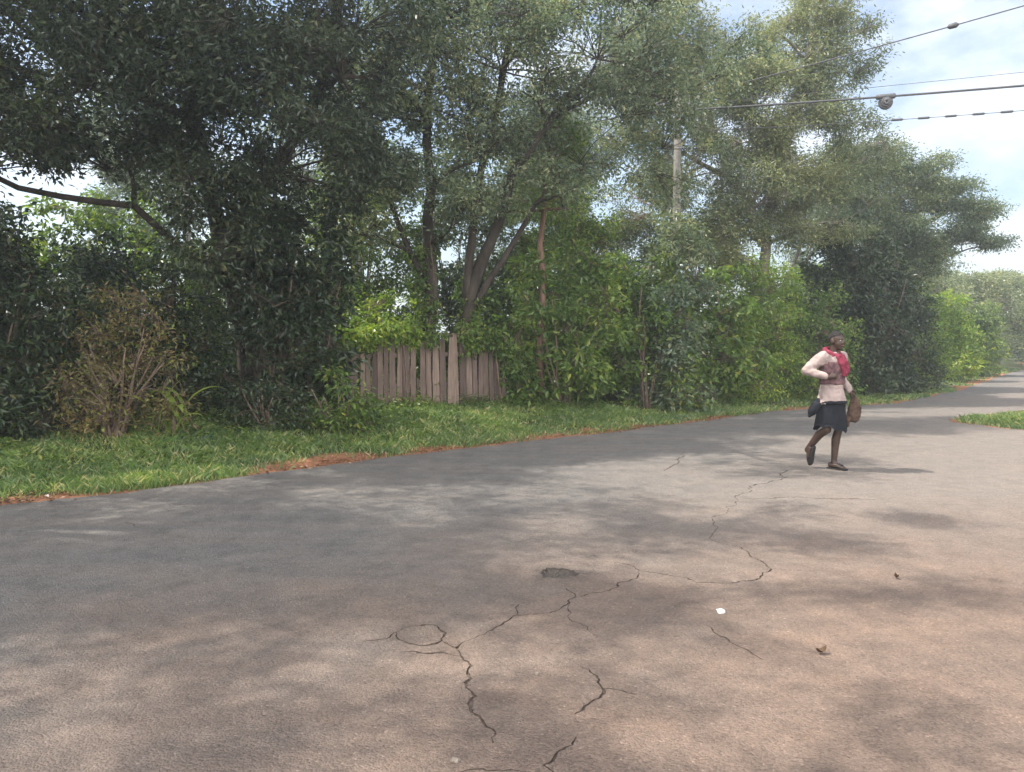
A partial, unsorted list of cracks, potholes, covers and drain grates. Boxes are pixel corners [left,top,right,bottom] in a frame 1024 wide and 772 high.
pothole [540,568,580,579]
crack [542,737,576,772]
crack [363,469,801,743]
